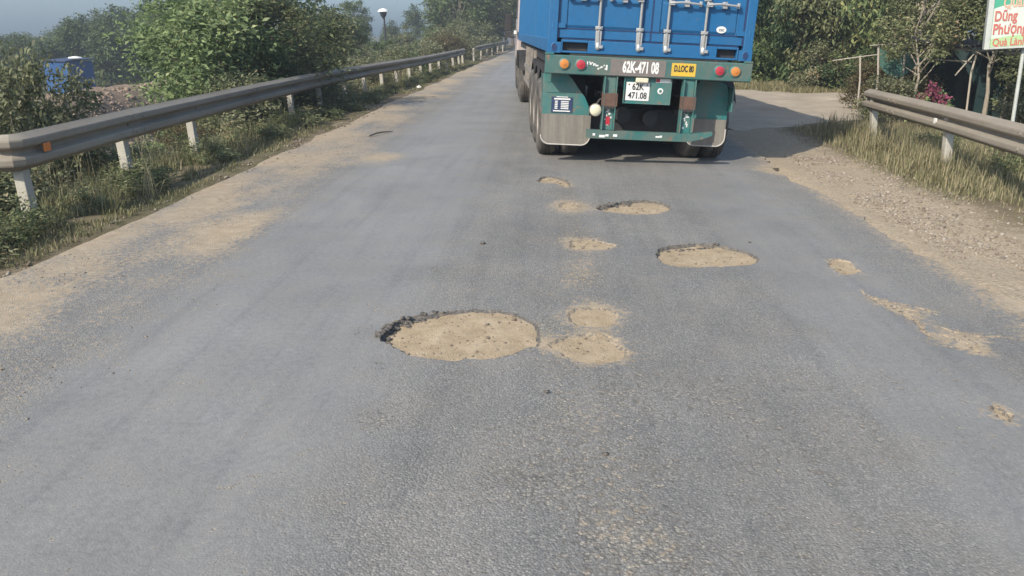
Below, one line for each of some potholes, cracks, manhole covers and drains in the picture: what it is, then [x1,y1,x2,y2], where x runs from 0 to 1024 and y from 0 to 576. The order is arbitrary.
pothole [569,239,617,250]
pothole [826,258,861,275]
pothole [596,199,671,215]
pothole [558,202,583,210]
pothole [374,309,542,361]
pothole [546,332,630,364]
pothole [566,307,619,327]
pothole [988,404,1015,423]
pothole [536,176,571,187]
pothole [655,243,760,267]
